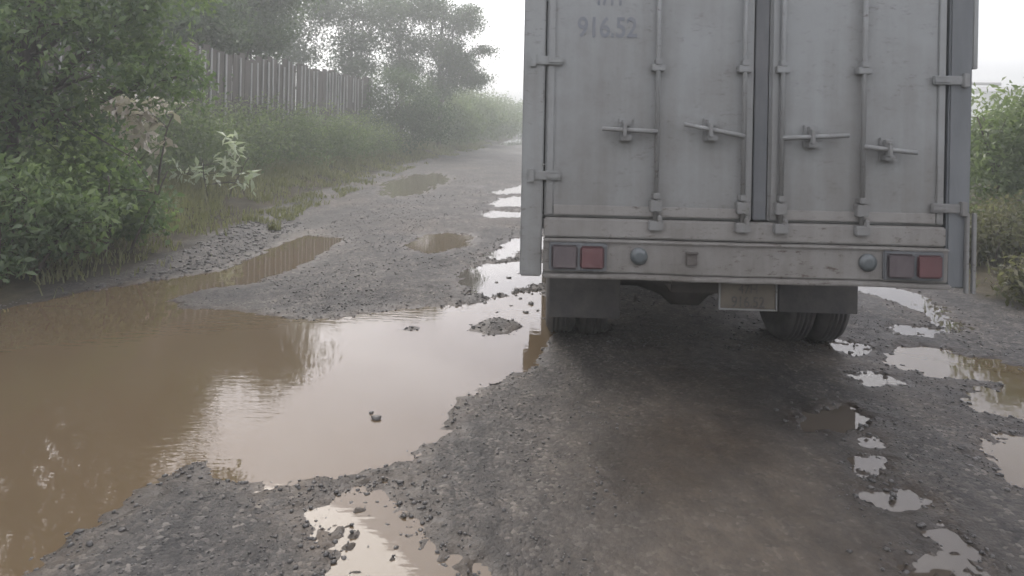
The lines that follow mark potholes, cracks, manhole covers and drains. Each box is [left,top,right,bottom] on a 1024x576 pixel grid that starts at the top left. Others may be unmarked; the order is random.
pothole [373,171,461,198]
pothole [878,340,1024,387]
pothole [0,233,557,576]
pothole [858,484,936,512]
pothole [489,195,521,207]
pothole [796,402,875,433]
pothole [847,369,910,387]
pothole [479,209,521,218]
pothole [975,432,1024,488]
pothole [956,384,1024,420]
pothole [894,522,990,576]
pothole [486,184,521,195]
